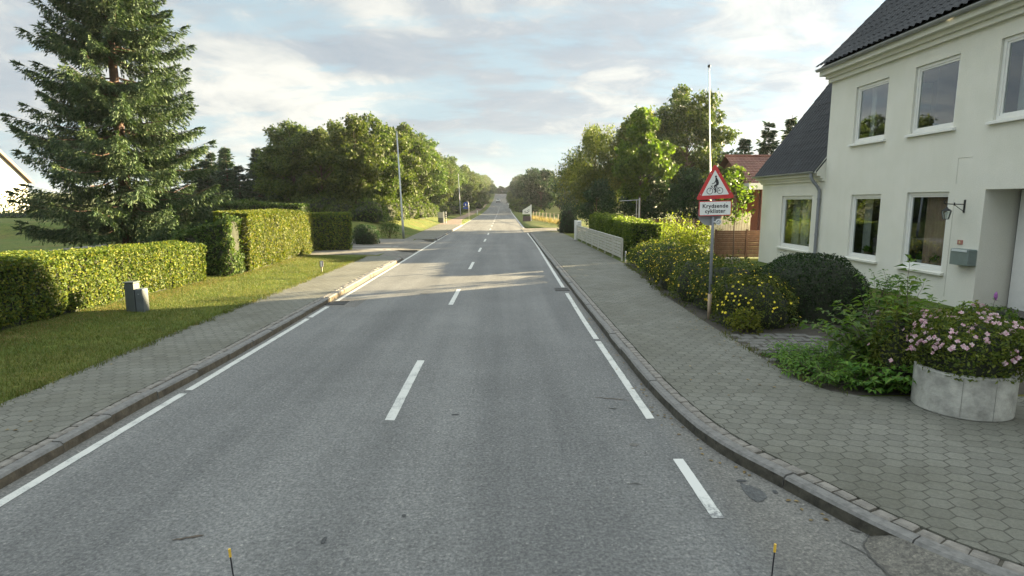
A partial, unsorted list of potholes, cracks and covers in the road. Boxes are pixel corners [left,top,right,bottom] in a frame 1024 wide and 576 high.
crack [839,529,891,576]
